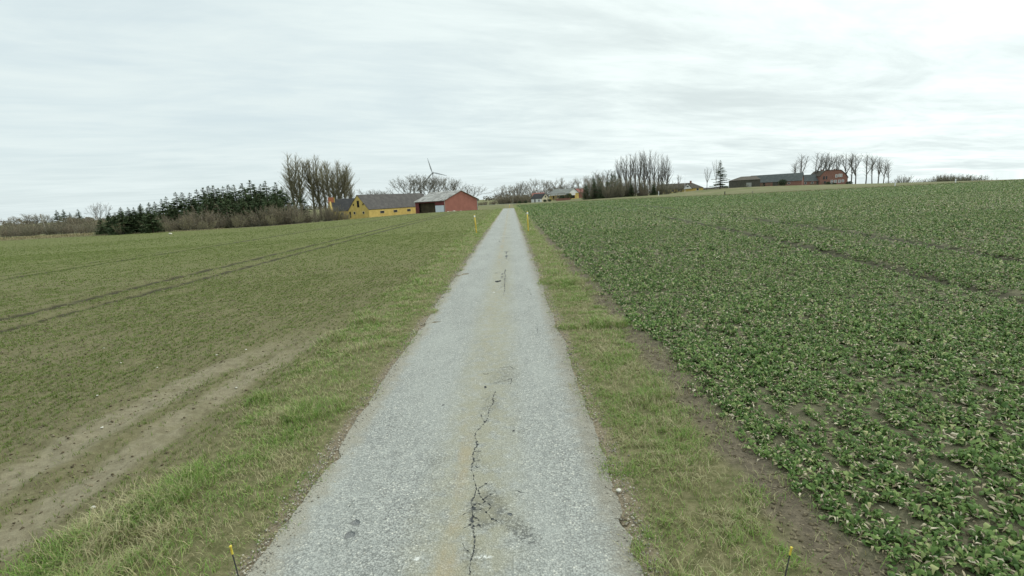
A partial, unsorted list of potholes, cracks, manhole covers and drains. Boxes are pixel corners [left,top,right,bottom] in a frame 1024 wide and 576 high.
crack [463,392,499,574]
